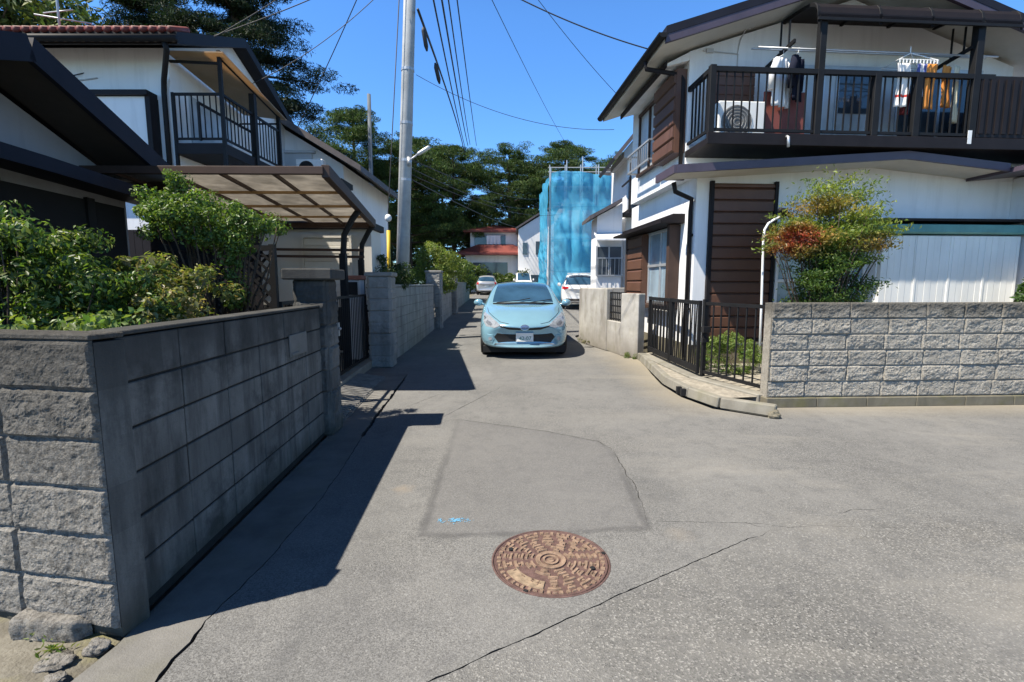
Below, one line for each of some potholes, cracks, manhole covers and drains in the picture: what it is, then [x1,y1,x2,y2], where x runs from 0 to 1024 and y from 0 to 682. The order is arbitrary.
manhole cover [492,530,611,598]
crack [155,374,648,682]
crack [656,508,885,528]
